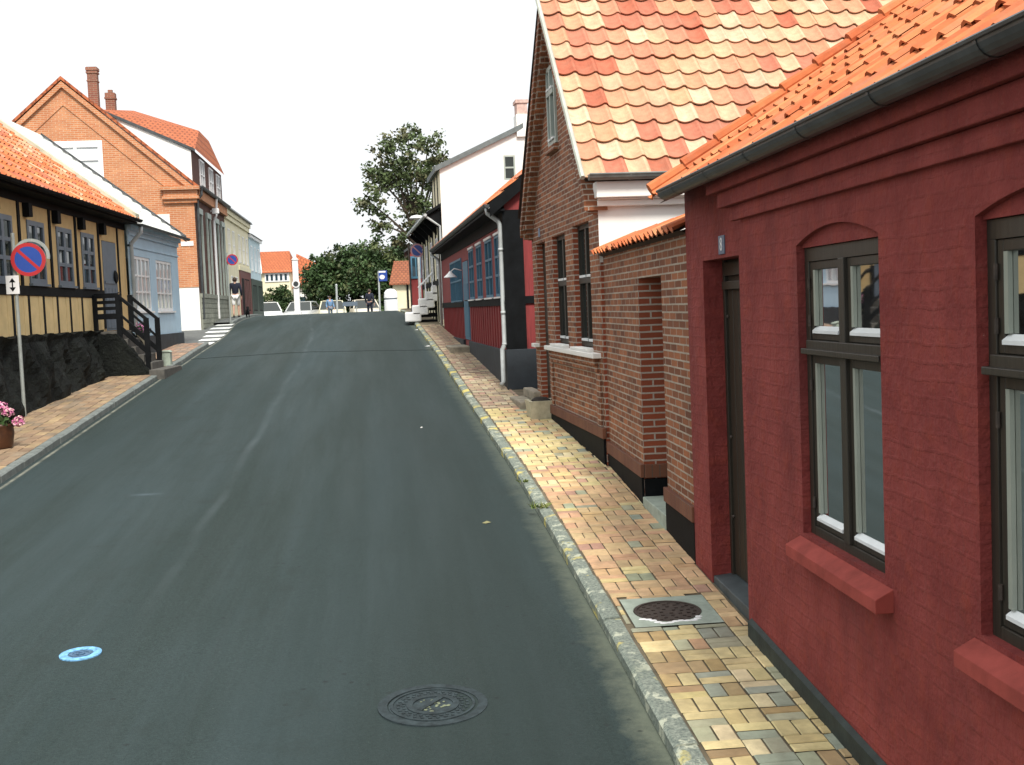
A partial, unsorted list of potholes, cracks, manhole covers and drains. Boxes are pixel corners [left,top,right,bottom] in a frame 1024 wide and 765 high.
manhole cover [378,684,488,727]
manhole cover [620,595,724,628]
utility cover [59,646,102,661]
